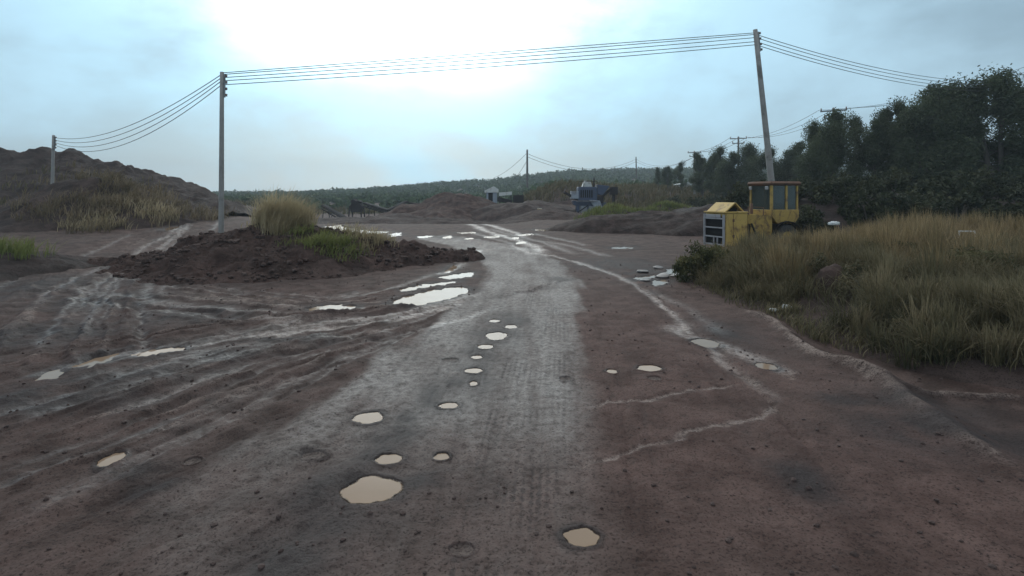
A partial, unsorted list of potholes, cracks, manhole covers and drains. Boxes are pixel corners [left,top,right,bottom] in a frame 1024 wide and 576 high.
pothole [89,446,133,473]
pothole [329,470,414,511]
pothole [370,451,408,469]
pothole [443,540,480,559]
pothole [750,361,783,372]
pothole [434,401,463,410]
pothole [556,523,606,551]
pothole [430,450,453,463]
pothole [461,366,486,375]
pothole [180,456,206,466]
pothole [347,409,390,426]
pothole [296,447,331,463]
